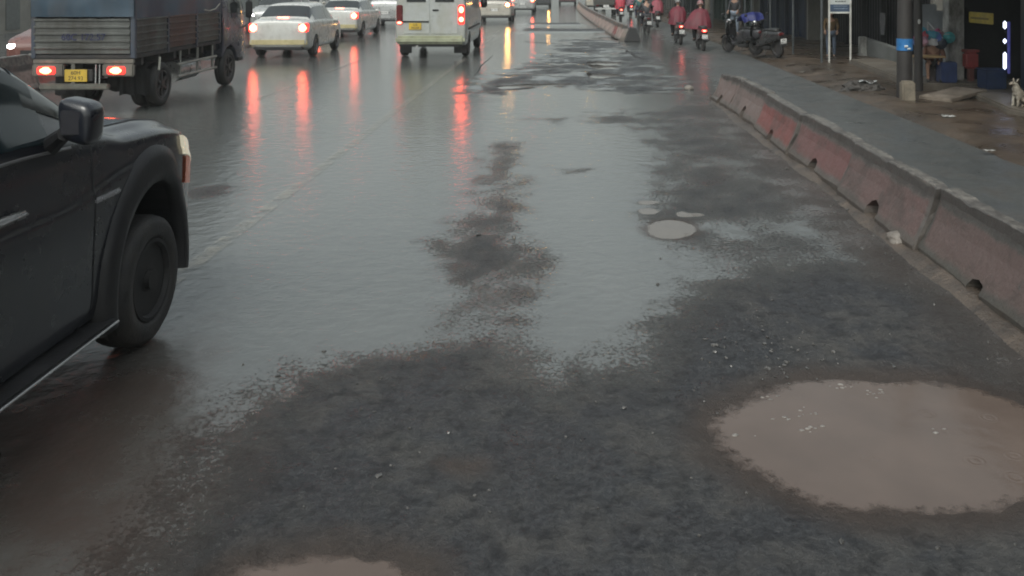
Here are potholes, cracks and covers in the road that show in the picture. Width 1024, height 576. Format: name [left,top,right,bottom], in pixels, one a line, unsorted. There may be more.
pothole [708,379,1024,515]
pothole [234,554,409,576]
